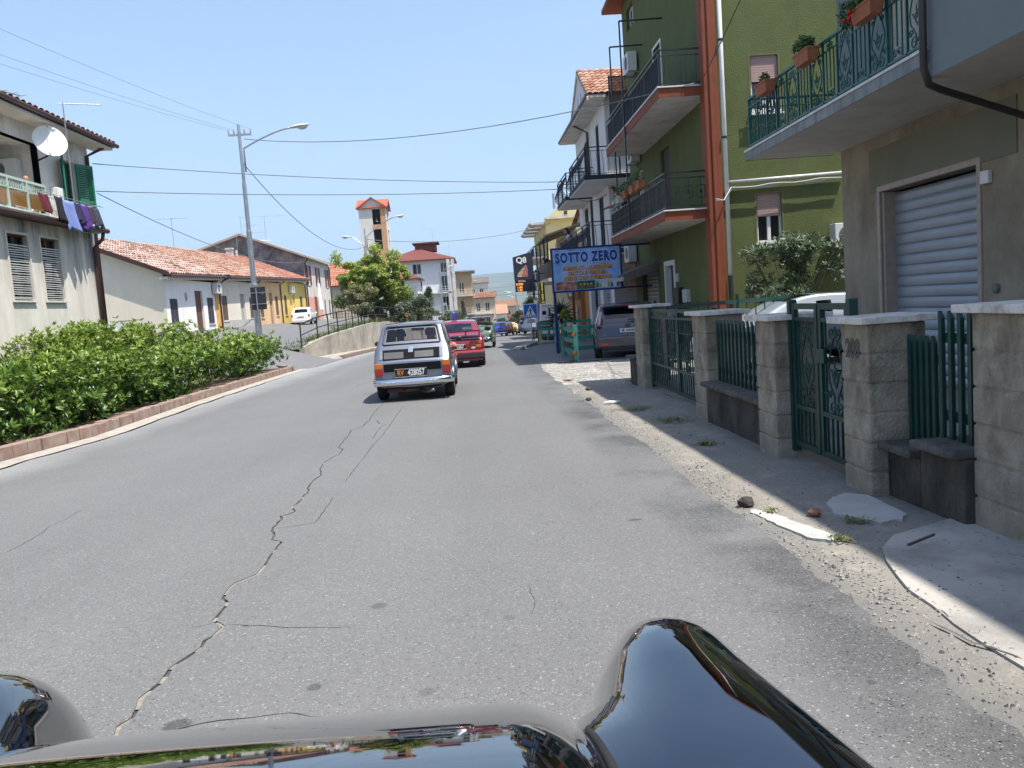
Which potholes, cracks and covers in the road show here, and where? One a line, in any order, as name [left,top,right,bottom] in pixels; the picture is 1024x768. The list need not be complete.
crack [114,404,383,736]
crack [925,609,1020,658]
